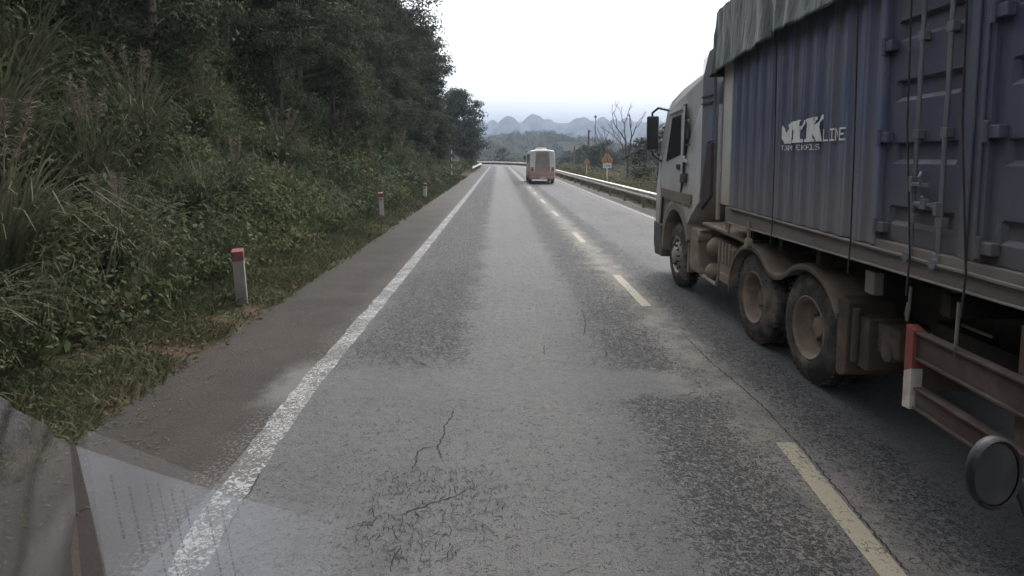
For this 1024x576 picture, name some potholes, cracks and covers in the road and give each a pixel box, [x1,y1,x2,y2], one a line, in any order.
crack [576,307,664,367]
crack [412,411,455,469]
crack [352,460,515,571]
